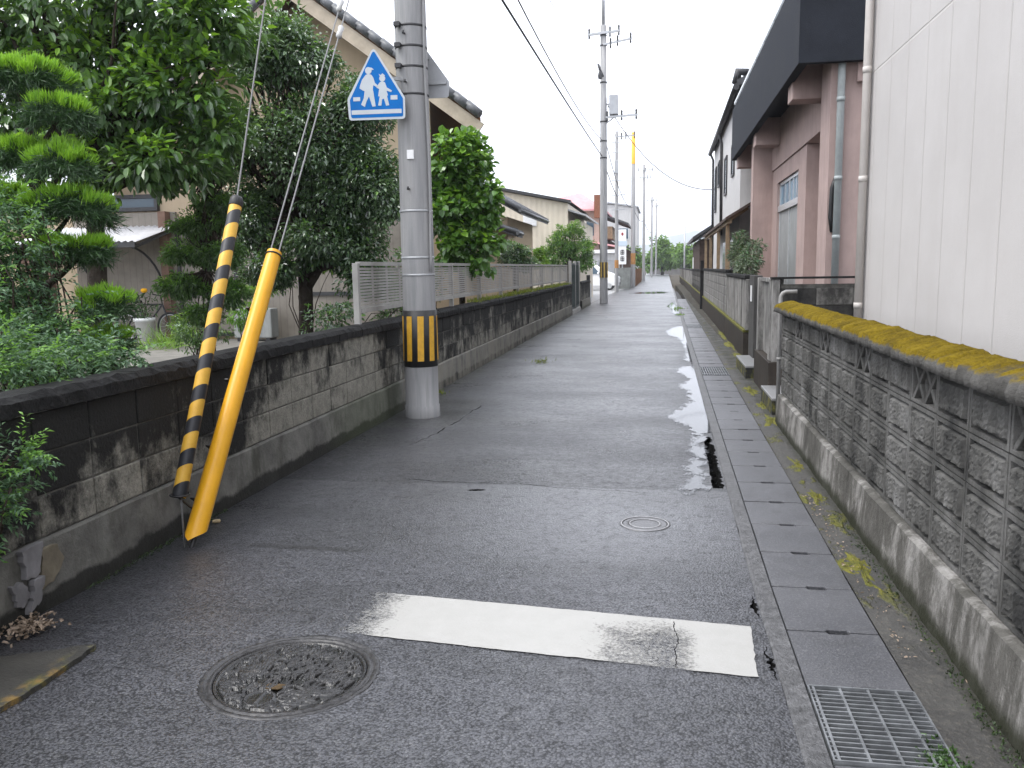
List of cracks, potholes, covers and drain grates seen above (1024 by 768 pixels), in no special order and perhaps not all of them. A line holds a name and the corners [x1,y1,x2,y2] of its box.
drain grate [807,684,960,768]
drain grate [700,367,730,377]
manhole cover [197,635,380,721]
manhole cover [620,516,671,532]
